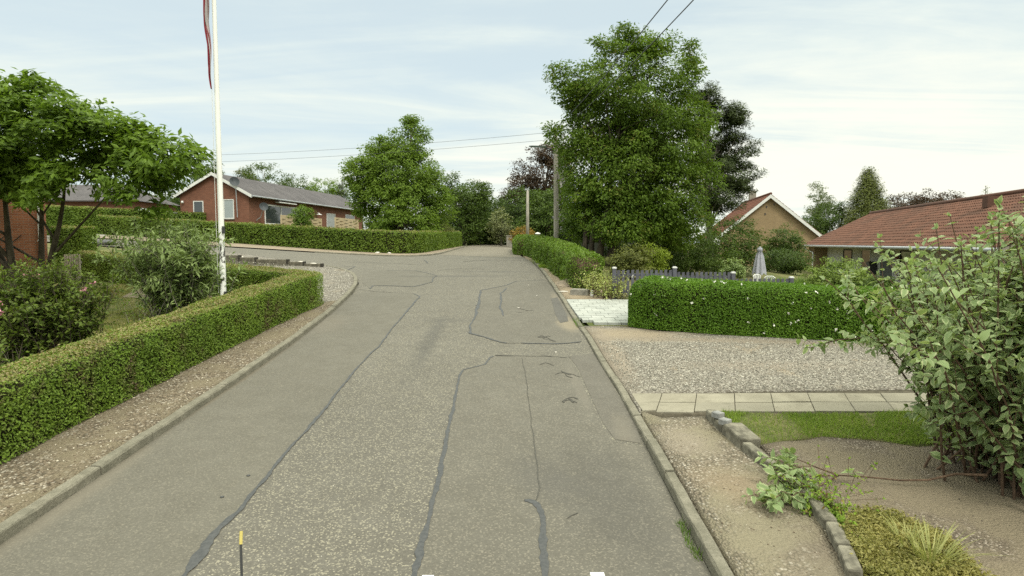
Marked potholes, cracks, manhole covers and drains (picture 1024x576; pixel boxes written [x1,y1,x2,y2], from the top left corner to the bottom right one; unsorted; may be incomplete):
crack [498,335,581,378]
